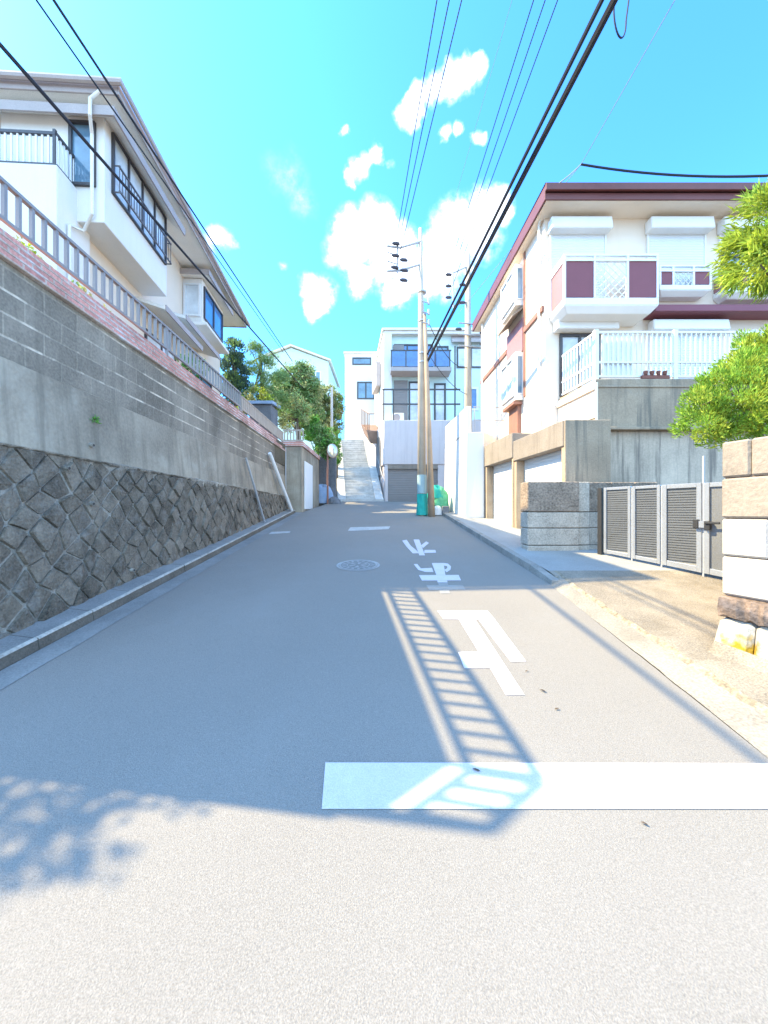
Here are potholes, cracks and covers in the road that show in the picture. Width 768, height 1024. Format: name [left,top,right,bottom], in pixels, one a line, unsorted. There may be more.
manhole cover [336,560,380,571]
